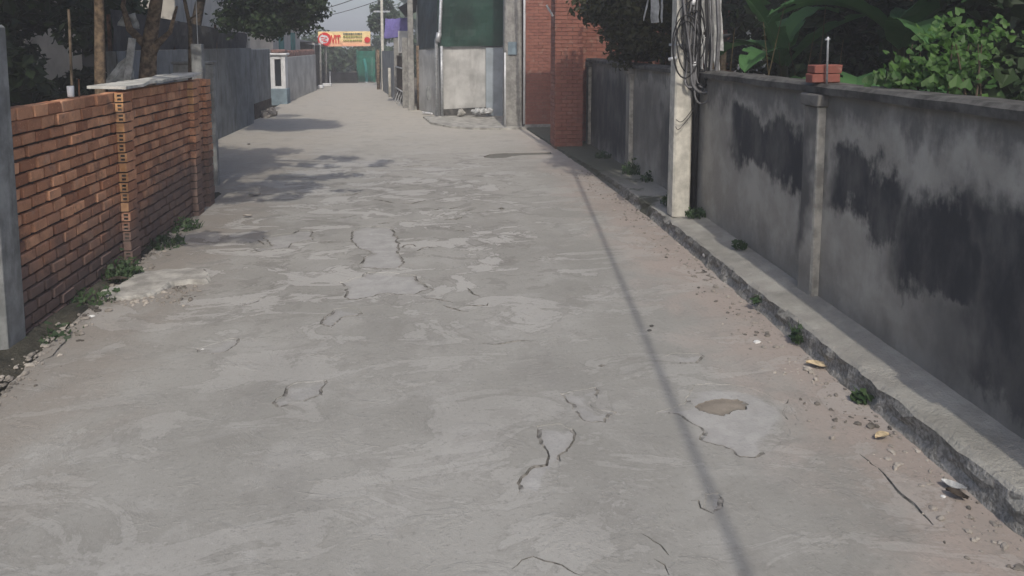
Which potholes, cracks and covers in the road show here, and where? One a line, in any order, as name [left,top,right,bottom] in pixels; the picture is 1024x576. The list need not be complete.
pothole [655,383,799,458]
crack [424,288,488,311]
crack [514,556,582,576]
